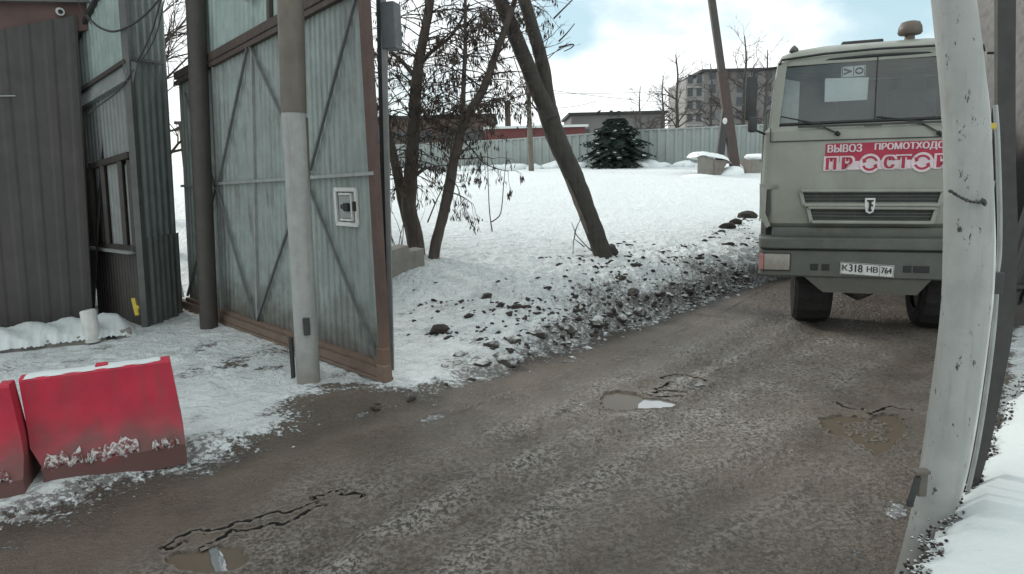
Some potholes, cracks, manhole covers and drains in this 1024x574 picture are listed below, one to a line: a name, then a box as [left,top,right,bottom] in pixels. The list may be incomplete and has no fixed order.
pothole [597,390,680,411]
pothole [161,542,254,574]
crack [833,402,911,415]
crack [643,374,707,398]
crack [158,488,364,553]
pothole [815,412,913,456]
